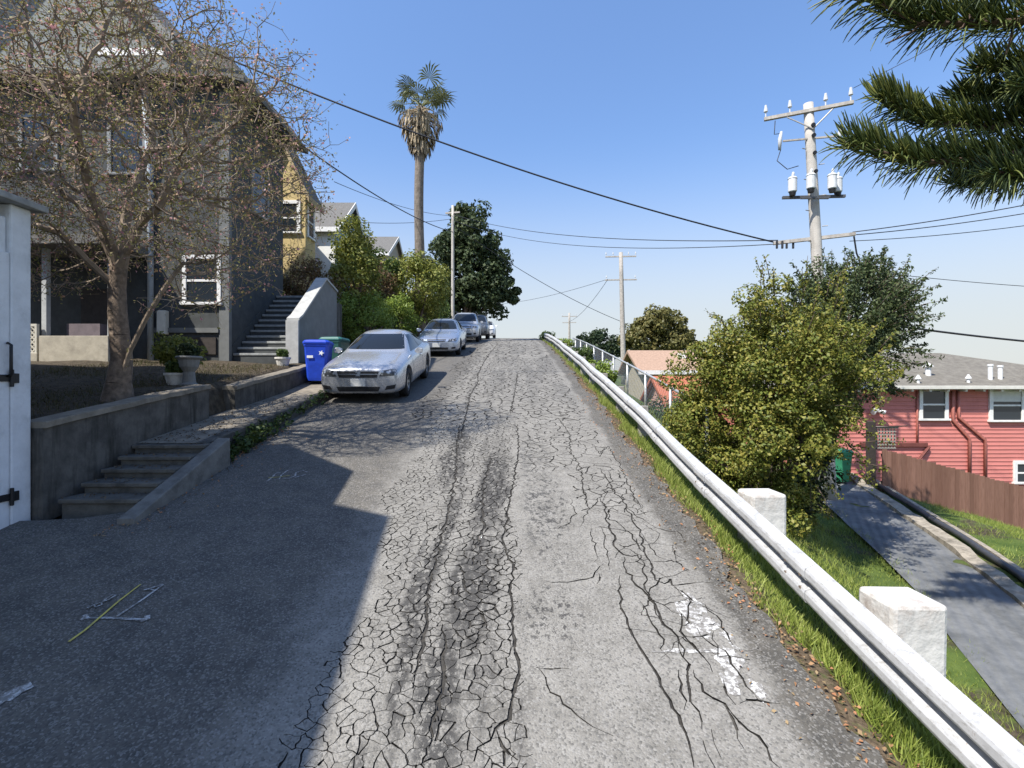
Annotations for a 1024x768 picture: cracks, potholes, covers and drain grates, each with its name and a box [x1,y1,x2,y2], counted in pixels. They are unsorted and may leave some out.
crack [278,339,780,768]
